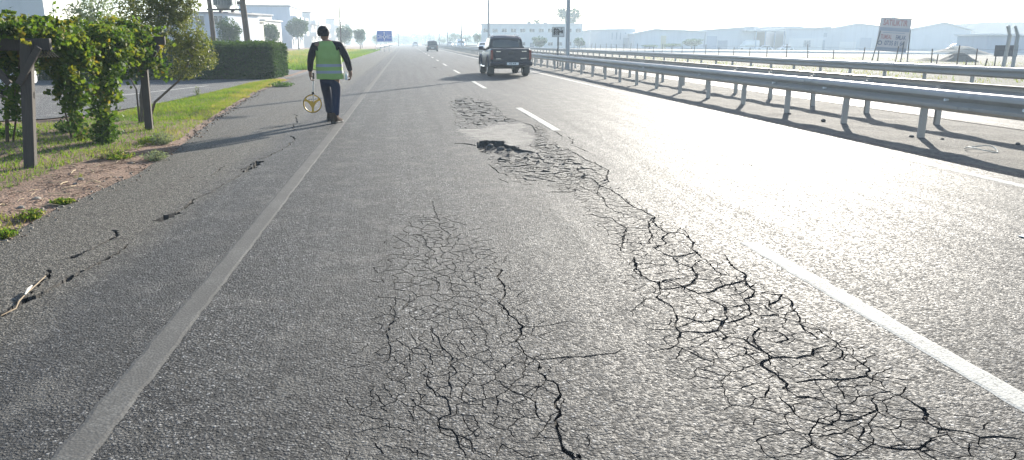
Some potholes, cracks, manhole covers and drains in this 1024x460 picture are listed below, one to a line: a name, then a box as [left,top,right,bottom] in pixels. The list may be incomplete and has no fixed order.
pothole [476,140,535,157]
crack [153,114,298,222]
crack [0,230,129,318]
crack [344,114,1024,460]
